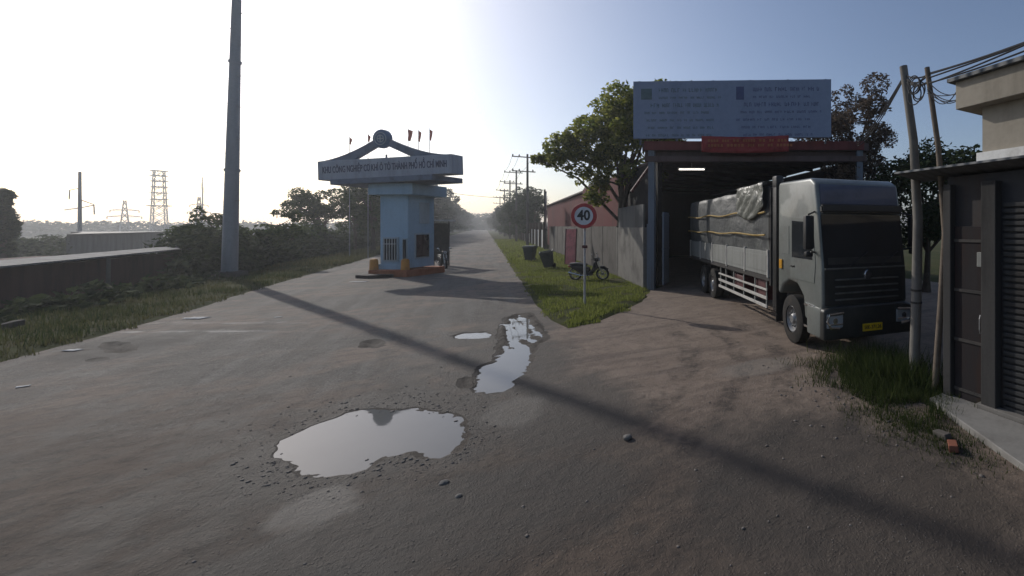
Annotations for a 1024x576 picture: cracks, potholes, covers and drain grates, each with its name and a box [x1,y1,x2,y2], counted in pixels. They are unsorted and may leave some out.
pothole [358,339,386,348]
pothole [97,341,138,353]
pothole [270,407,472,479]
pothole [471,312,551,394]
pothole [451,331,493,339]
